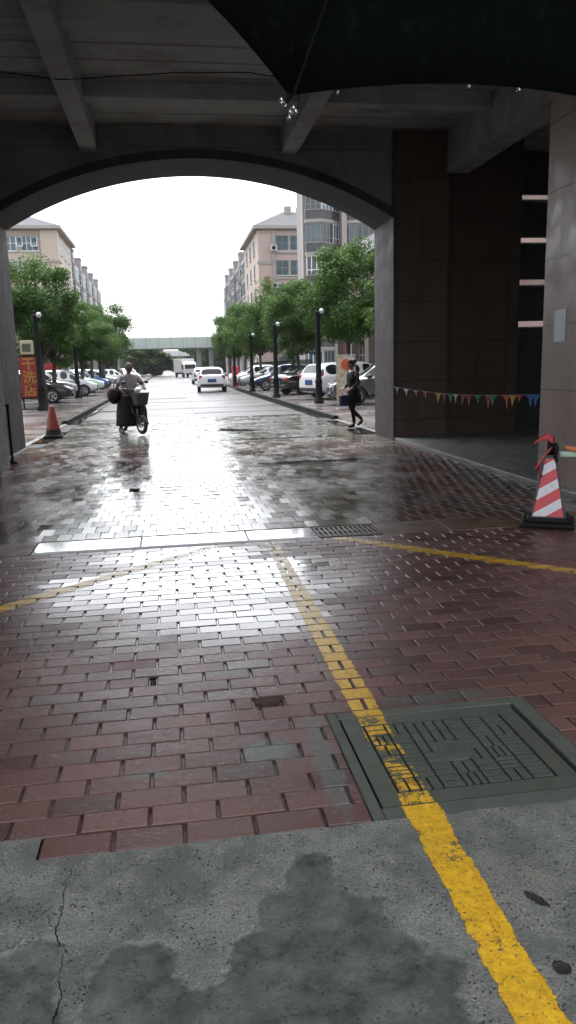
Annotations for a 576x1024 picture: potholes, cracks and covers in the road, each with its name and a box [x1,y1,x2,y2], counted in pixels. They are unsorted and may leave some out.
drain grate [312,524,382,538]
pothole [253,697,285,710]
manhole cover [326,696,576,821]
crack [52,867,73,1024]
pothole [523,891,550,907]
pothole [552,961,572,975]
